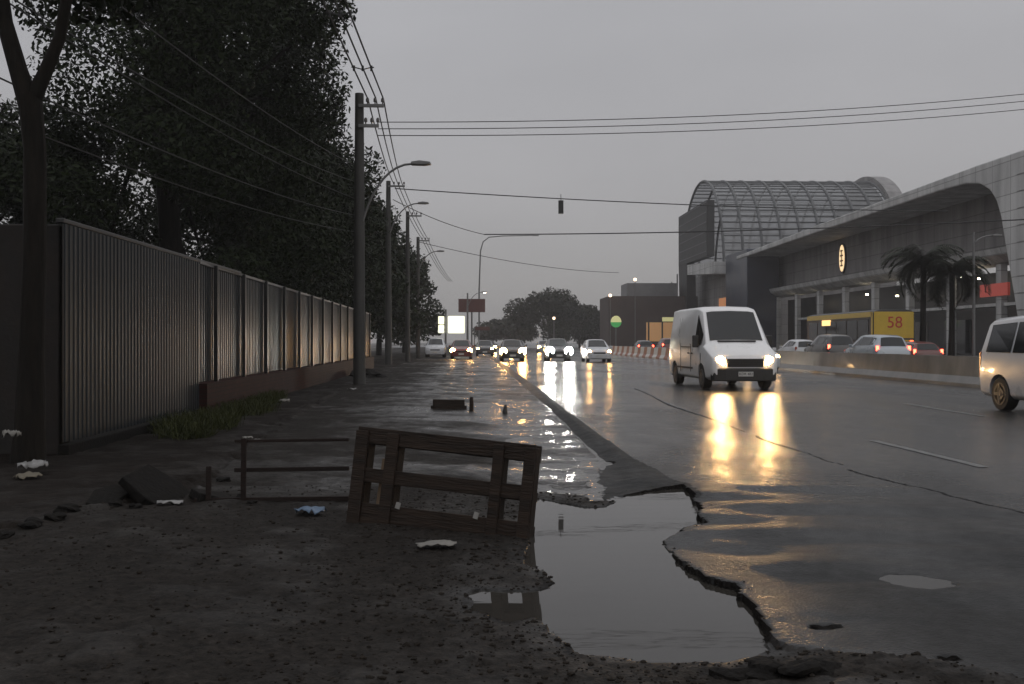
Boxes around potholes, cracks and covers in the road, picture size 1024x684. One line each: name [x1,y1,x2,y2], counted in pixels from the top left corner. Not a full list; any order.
crack [851,470,1024,514]
pothole [459,483,780,665]
